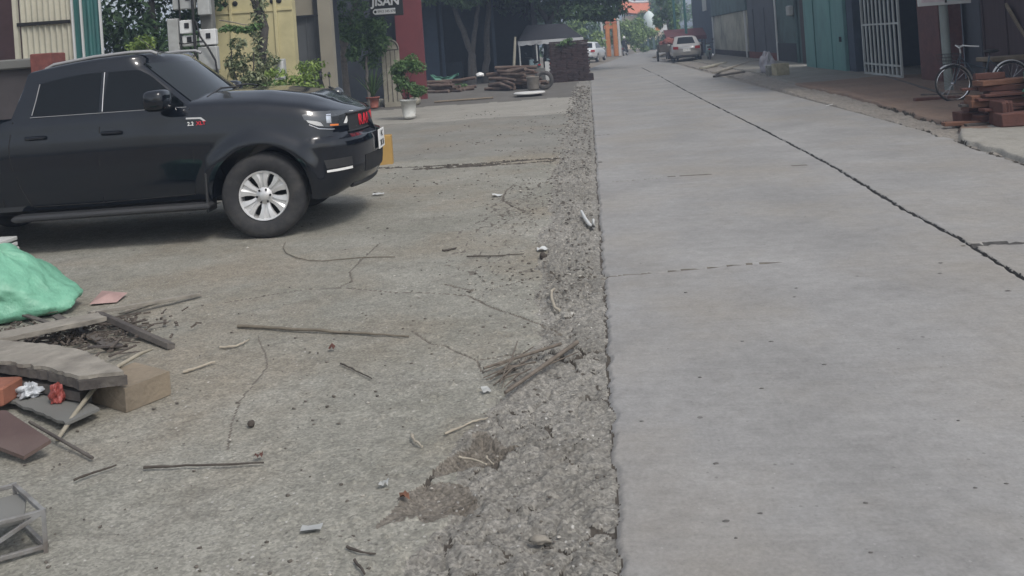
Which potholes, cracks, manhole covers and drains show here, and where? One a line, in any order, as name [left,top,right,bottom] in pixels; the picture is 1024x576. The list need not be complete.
crack [225,96,780,576]
crack [643,68,1024,280]
pothole [376,482,479,529]
pothole [434,431,519,477]
